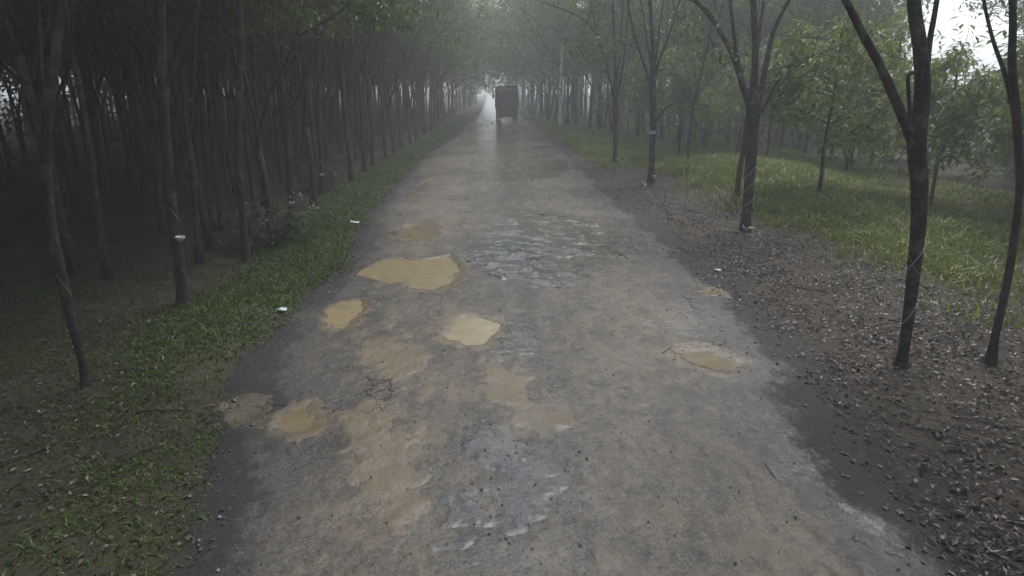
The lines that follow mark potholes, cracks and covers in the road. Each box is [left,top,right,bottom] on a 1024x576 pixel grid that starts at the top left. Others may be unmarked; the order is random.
pothole [663,341,756,378]
pothole [394,222,446,244]
pothole [355,253,474,292]
pothole [435,312,505,349]
crack [359,376,394,413]
pothole [214,393,274,431]
pothole [319,297,377,333]
pothole [263,396,339,444]
